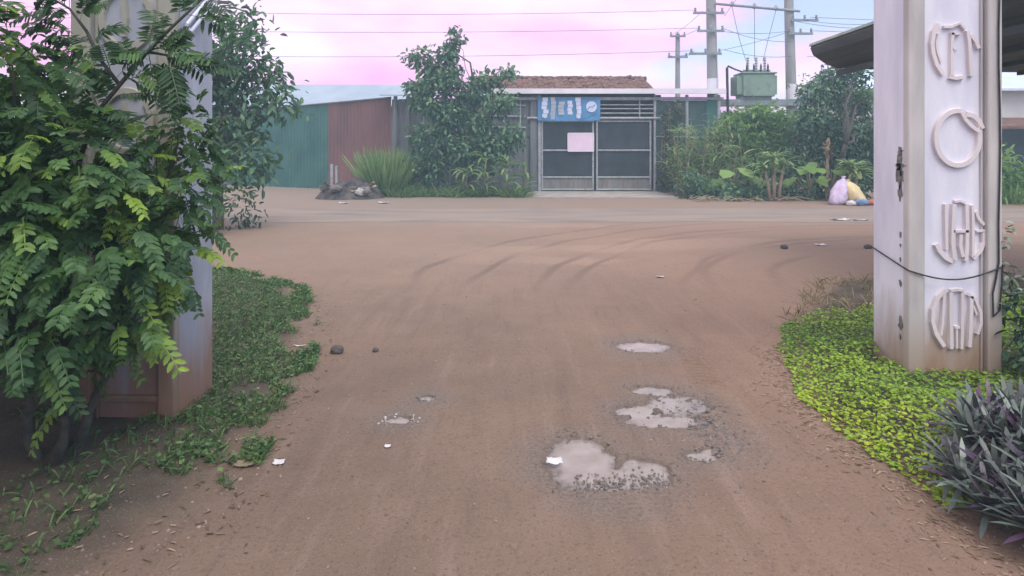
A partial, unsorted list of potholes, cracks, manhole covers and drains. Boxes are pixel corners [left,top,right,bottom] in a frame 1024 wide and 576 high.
pothole [531,427,686,498]
pothole [599,379,768,493]
pothole [377,412,421,425]
pothole [414,393,439,402]
pothole [604,338,681,355]
